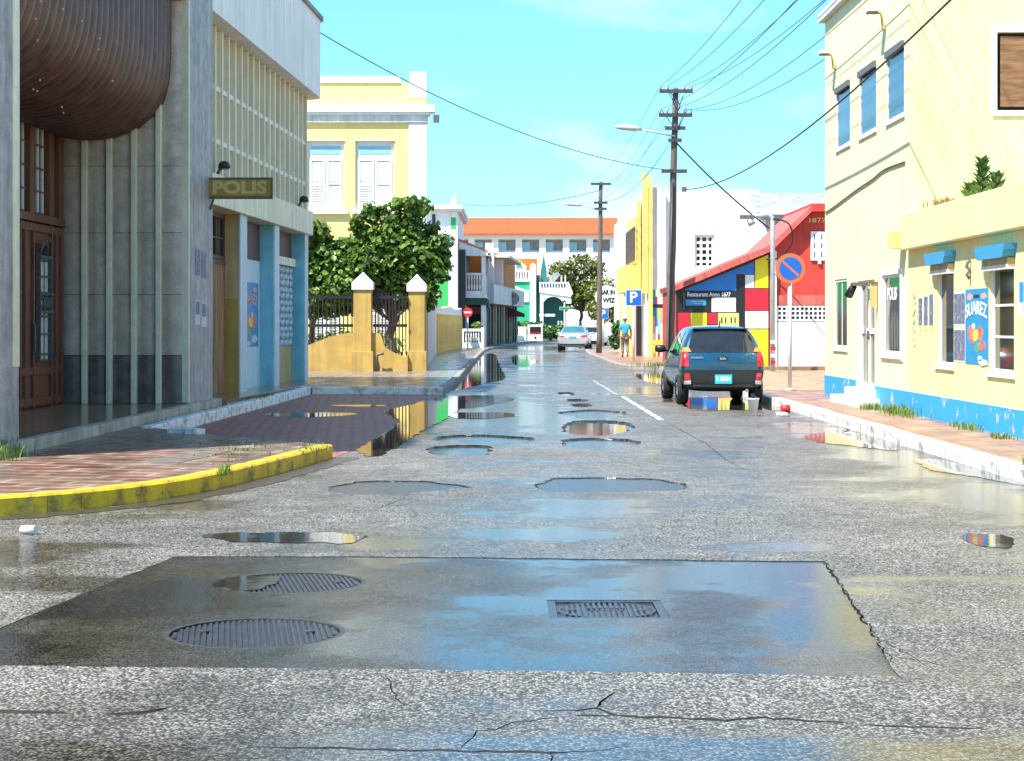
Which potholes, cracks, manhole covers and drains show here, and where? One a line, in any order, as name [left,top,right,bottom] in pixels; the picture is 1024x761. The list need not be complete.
manhole cover [163,618,346,649]
pothole [328,481,473,495]
crack [245,691,849,761]
crack [109,707,170,715]
pothole [534,477,688,492]
pothole [561,420,636,436]
manhole cover [220,572,366,594]
pothole [557,409,628,419]
crack [385,675,418,706]
pothole [559,438,642,449]
crack [823,561,942,670]
